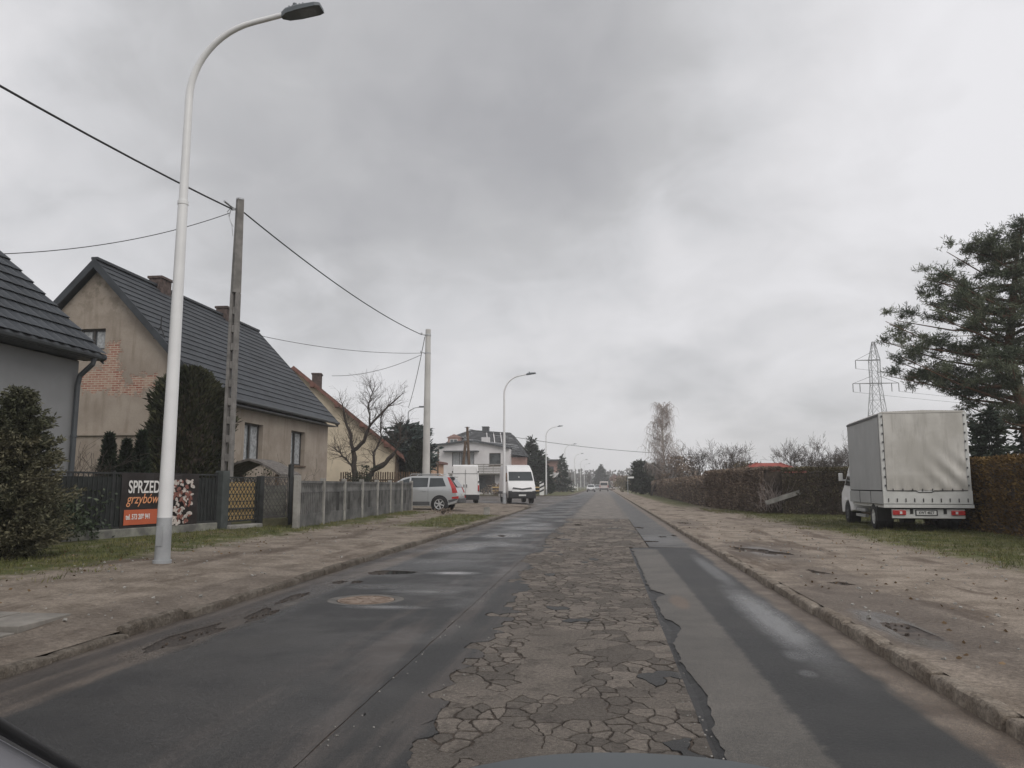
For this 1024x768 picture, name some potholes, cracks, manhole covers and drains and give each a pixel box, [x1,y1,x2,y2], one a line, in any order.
crack [294,519,727,768]
pothole [730,547,794,555]
pothole [879,622,945,641]
pothole [142,622,227,653]
pothole [274,592,311,605]
manhole cover [327,594,404,605]
pothole [244,608,280,623]
